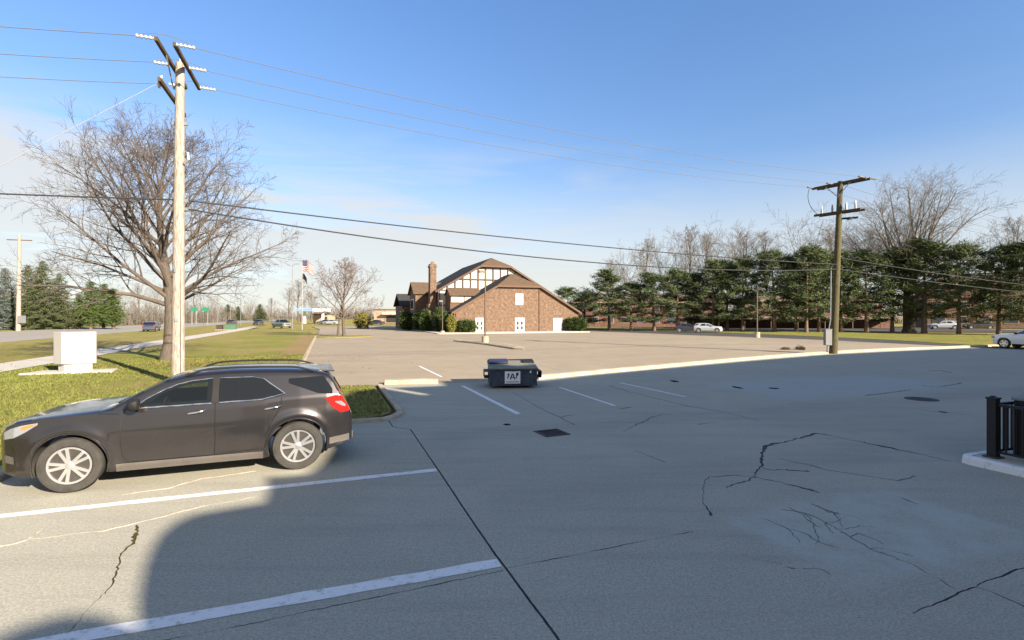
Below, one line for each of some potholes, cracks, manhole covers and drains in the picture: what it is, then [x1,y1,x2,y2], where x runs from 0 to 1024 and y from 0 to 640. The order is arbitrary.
drain grate [533,429,571,437]
crack [167,433,953,640]
crack [0,497,252,631]
